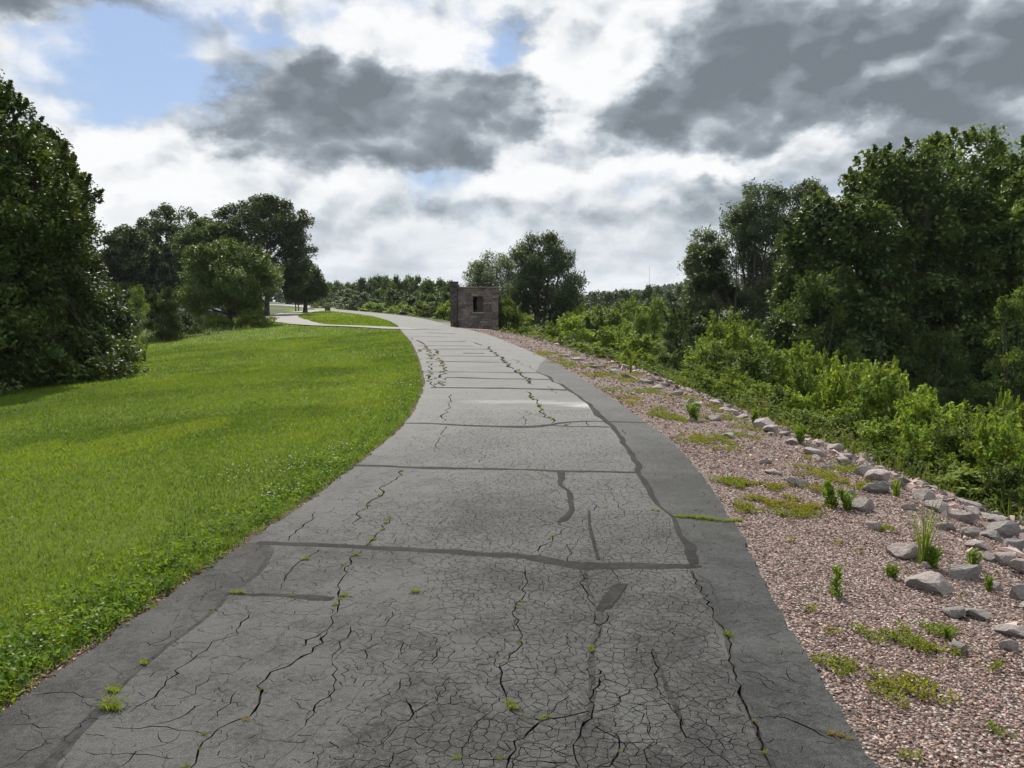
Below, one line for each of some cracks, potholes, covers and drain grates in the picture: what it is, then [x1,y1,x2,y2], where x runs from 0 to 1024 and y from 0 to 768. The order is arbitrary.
crack [380,346,688,493]
crack [5,464,871,768]
